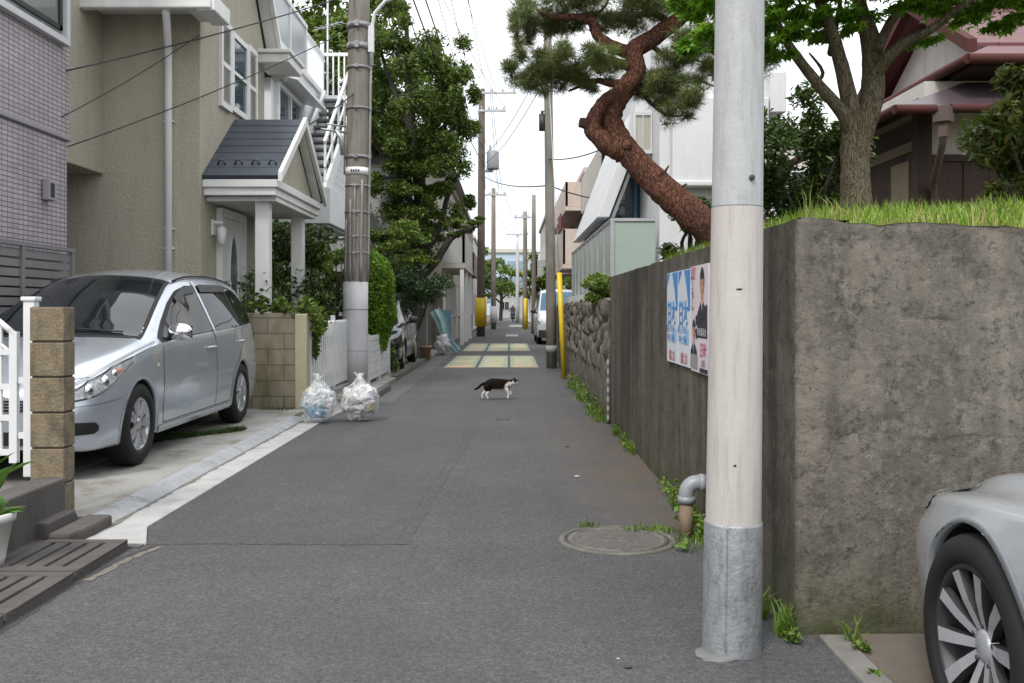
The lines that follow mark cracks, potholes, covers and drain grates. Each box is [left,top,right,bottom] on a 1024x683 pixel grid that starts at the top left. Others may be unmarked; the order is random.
manhole cover [558,525,677,555]
